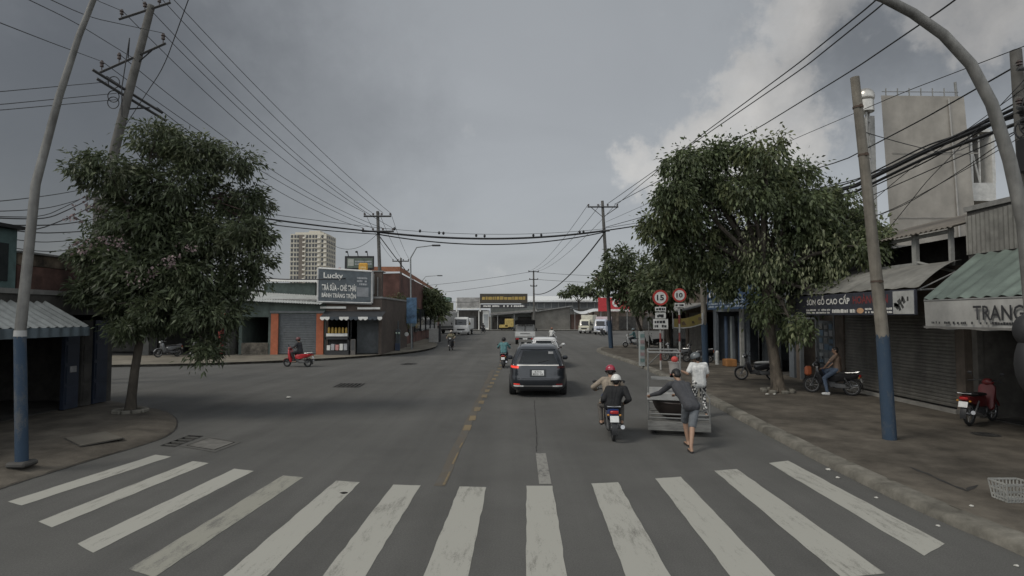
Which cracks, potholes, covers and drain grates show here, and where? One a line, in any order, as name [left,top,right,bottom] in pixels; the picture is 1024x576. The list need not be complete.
manhole cover [181,436,240,452]
drain grate [160,435,202,447]
manhole cover [63,431,125,447]
